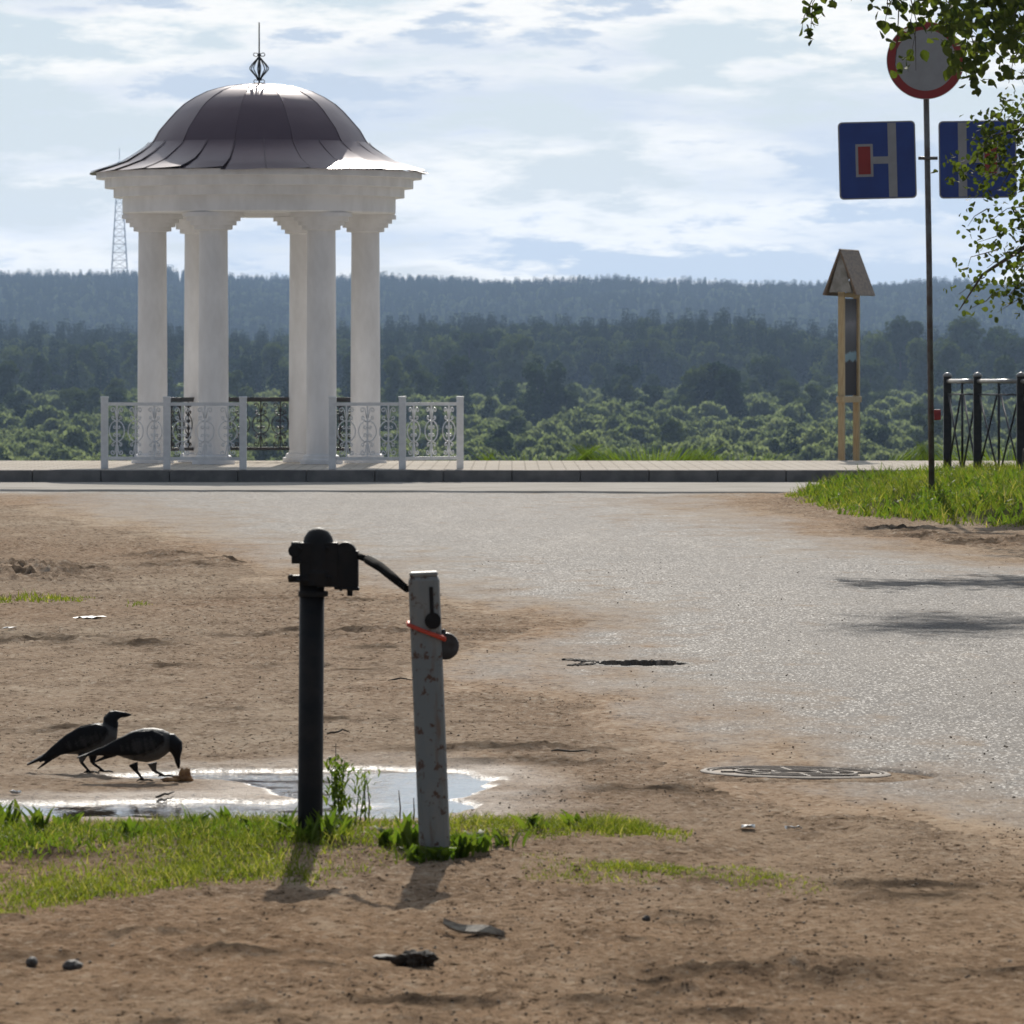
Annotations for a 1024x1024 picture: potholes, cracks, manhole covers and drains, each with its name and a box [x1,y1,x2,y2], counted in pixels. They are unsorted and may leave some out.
pothole [585,659,696,667]
manhole cover [700,766,891,780]
